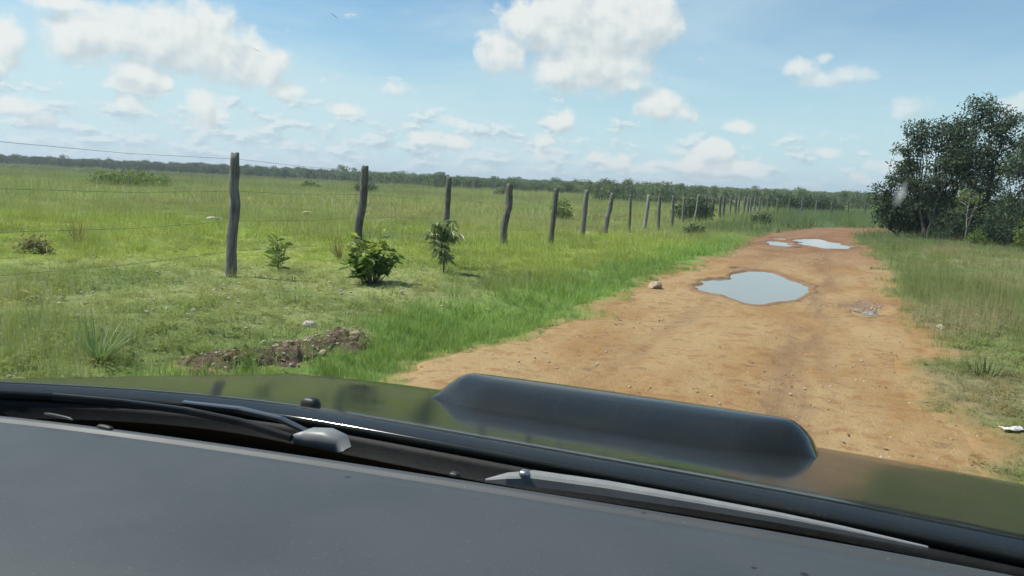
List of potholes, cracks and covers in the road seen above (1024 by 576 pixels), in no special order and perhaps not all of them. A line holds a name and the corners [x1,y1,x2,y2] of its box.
pothole [834,299,901,318]
pothole [687,269,819,306]
pothole [786,238,860,249]
pothole [757,239,803,248]
